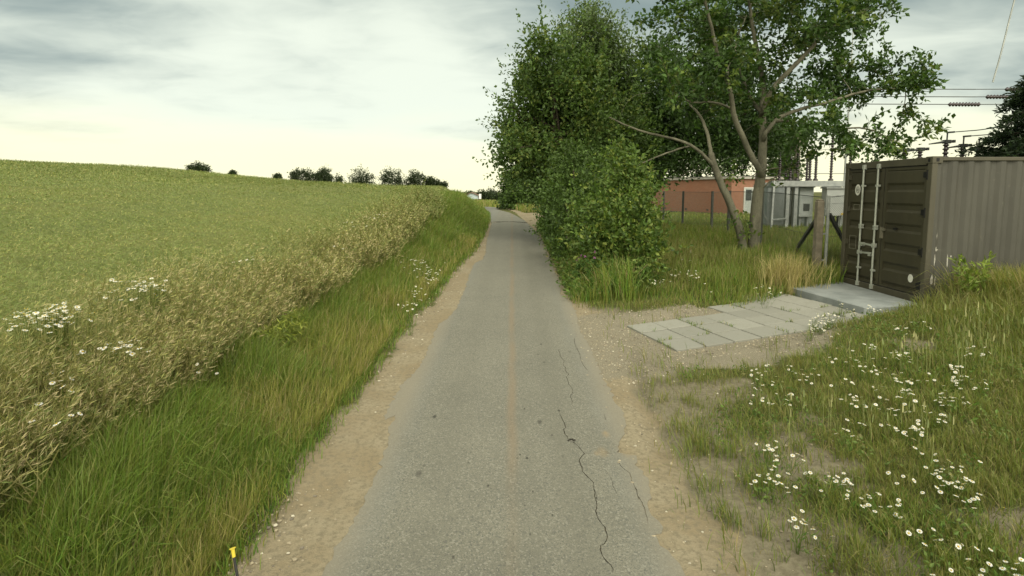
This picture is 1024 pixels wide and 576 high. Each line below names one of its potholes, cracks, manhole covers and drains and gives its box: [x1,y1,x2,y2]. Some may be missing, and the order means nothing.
crack [561,351,648,569]
